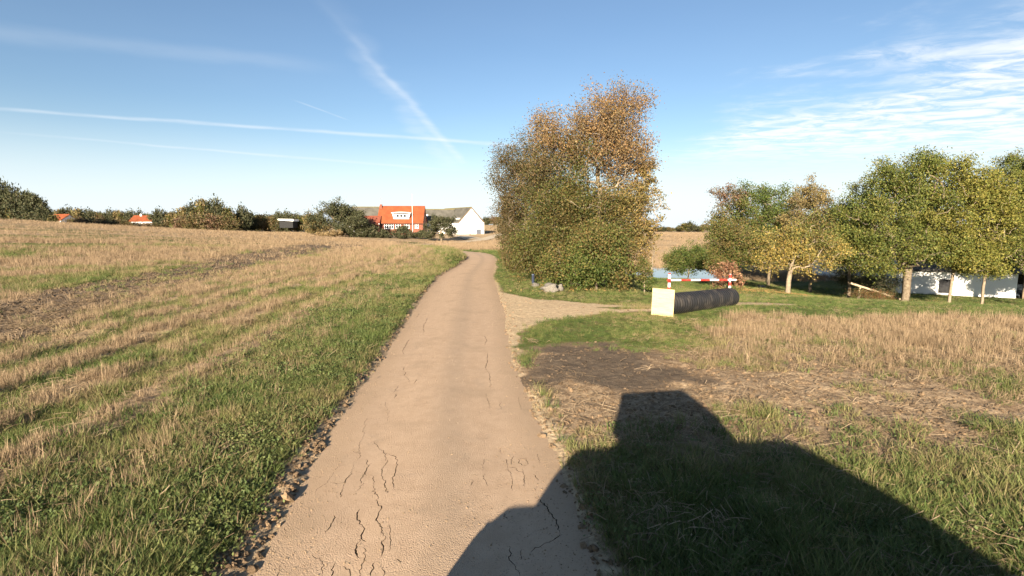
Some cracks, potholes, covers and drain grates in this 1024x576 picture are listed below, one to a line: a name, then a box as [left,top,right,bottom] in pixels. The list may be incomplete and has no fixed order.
crack [312,420,401,576]
crack [470,451,560,574]
